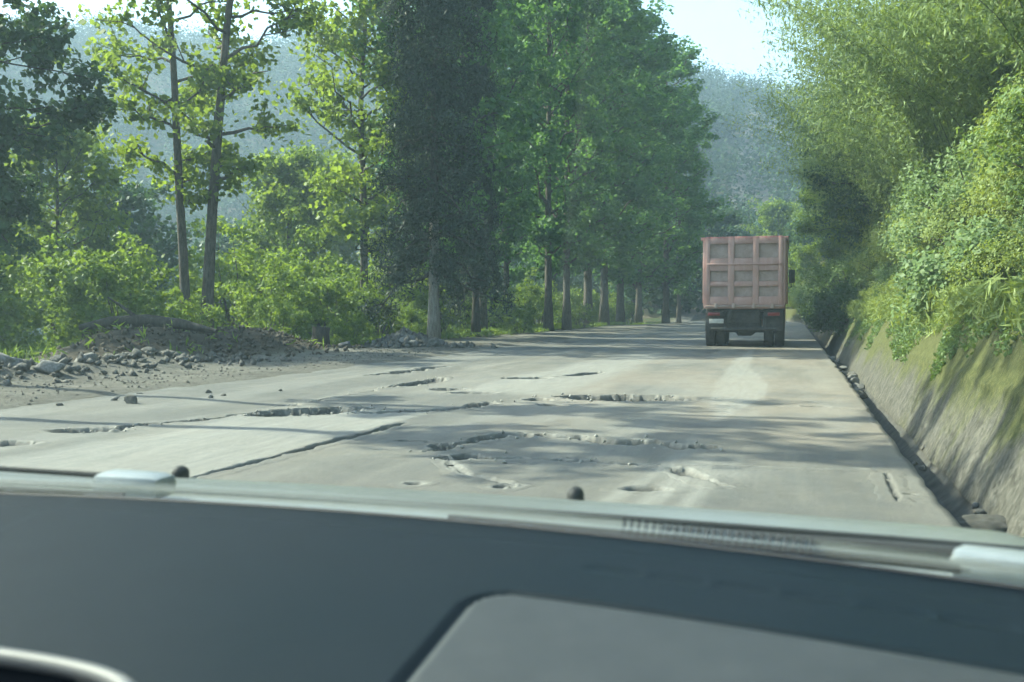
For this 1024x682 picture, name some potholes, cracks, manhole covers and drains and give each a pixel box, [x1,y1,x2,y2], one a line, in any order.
pothole [540,394,717,402]
pothole [599,483,698,495]
pothole [476,482,535,492]
crack [78,366,916,503]
pothole [388,480,441,488]
pothole [230,406,388,418]
pothole [34,427,147,435]
pothole [380,377,453,388]
